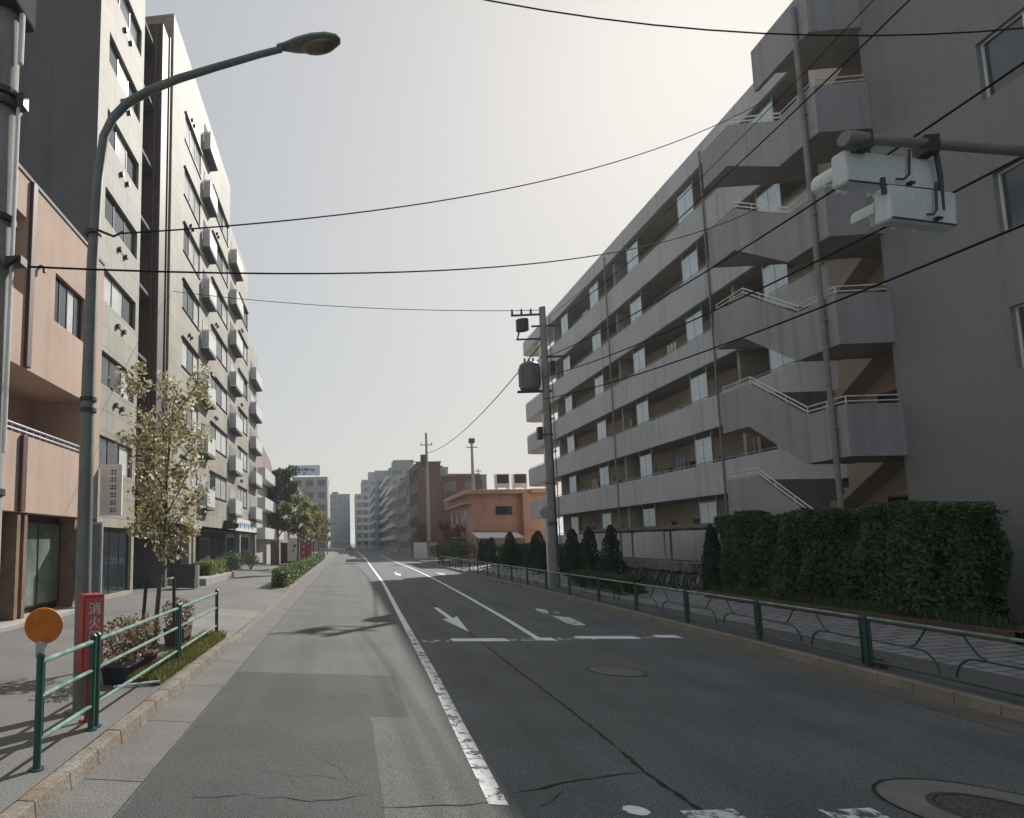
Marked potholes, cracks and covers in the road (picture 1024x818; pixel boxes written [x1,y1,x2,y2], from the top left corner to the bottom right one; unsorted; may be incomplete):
manhole cover [871,778,1024,818]
manhole cover [585,665,649,677]
